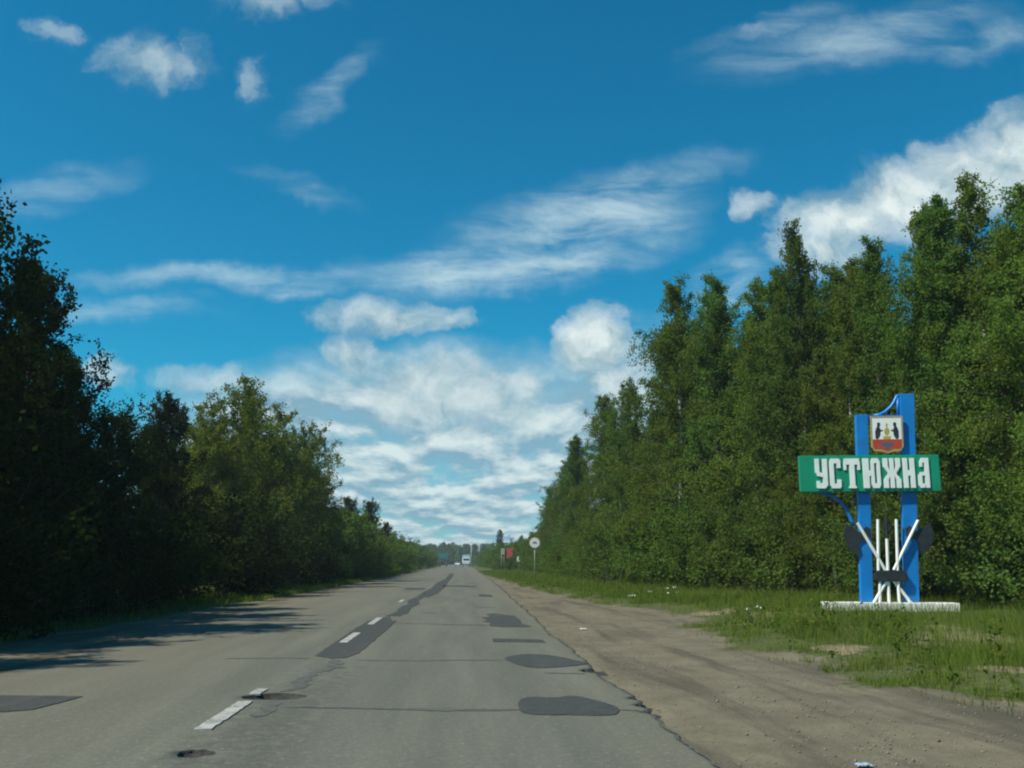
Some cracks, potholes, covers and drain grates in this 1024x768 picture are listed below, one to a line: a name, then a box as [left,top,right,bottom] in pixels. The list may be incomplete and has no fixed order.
pothole [232,692,317,702]
crack [249,658,629,717]
pothole [163,748,229,761]
